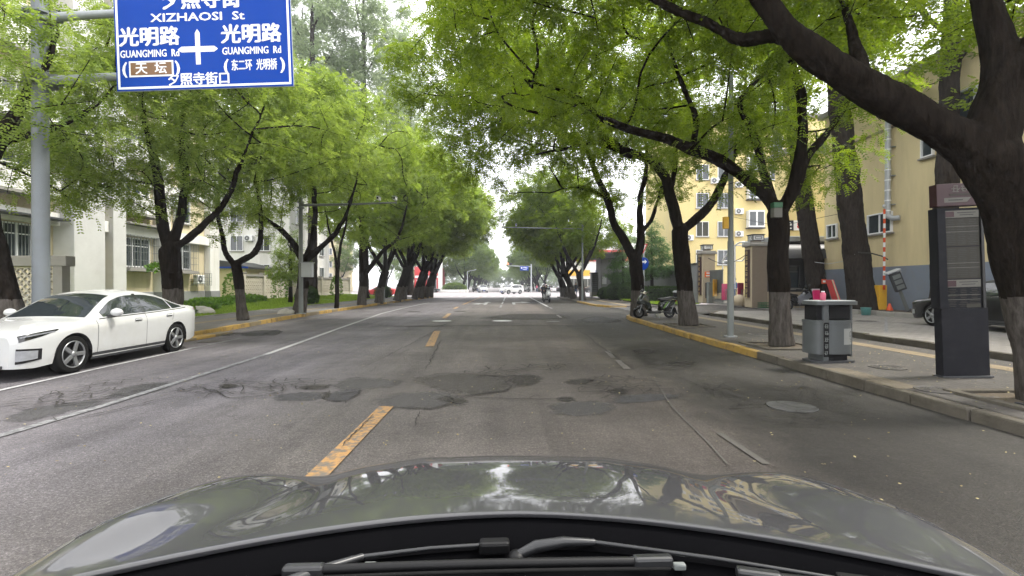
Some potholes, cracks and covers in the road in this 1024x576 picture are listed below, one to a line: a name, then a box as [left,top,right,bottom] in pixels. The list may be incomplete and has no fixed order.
manhole cover [766,401,819,413]
